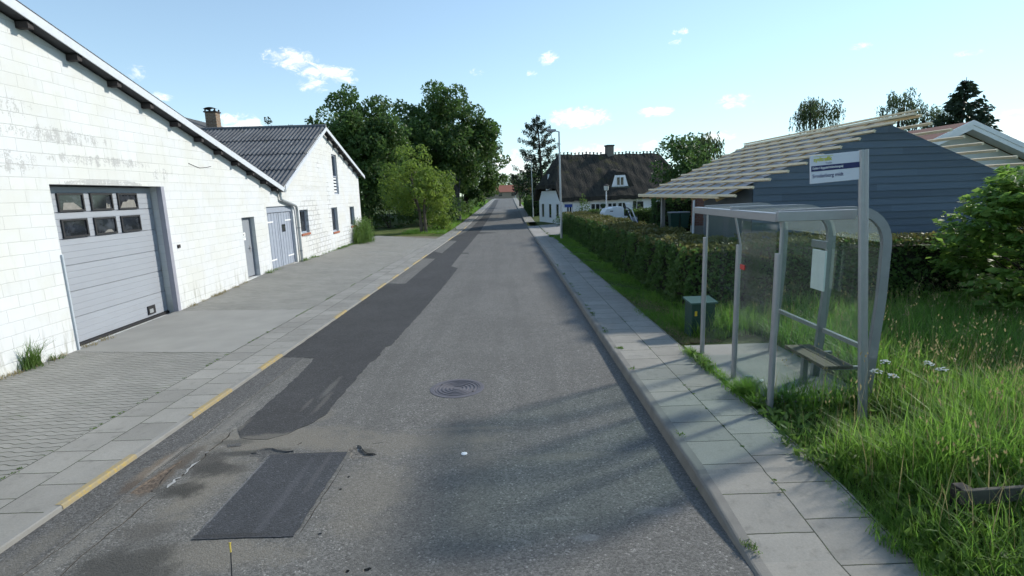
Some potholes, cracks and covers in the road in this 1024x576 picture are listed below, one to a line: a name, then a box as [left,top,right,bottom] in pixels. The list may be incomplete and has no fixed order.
manhole cover [430,379,484,398]
